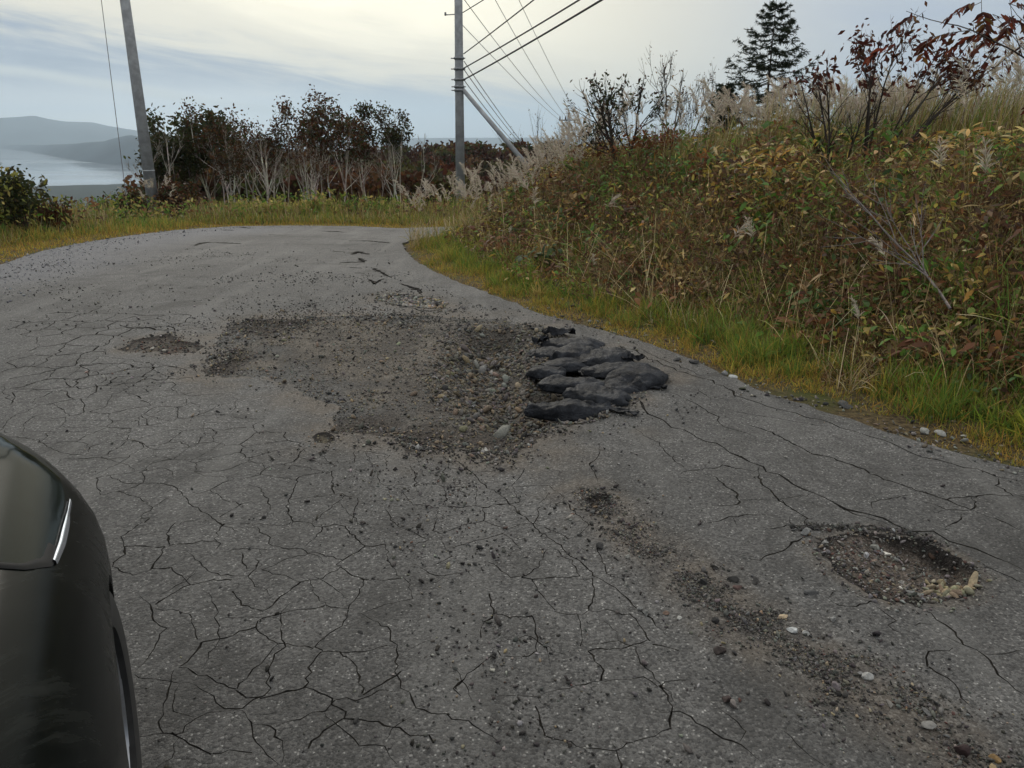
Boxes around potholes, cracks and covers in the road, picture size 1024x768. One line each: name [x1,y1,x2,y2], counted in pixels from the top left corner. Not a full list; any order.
crack [2,306,207,405]
pothole [118,334,206,355]
crack [334,241,449,311]
pothole [200,315,646,456]
crack [1,349,825,768]
pothole [817,531,981,605]
pothole [584,494,612,509]
crack [620,345,1024,583]
crack [828,590,1023,705]
